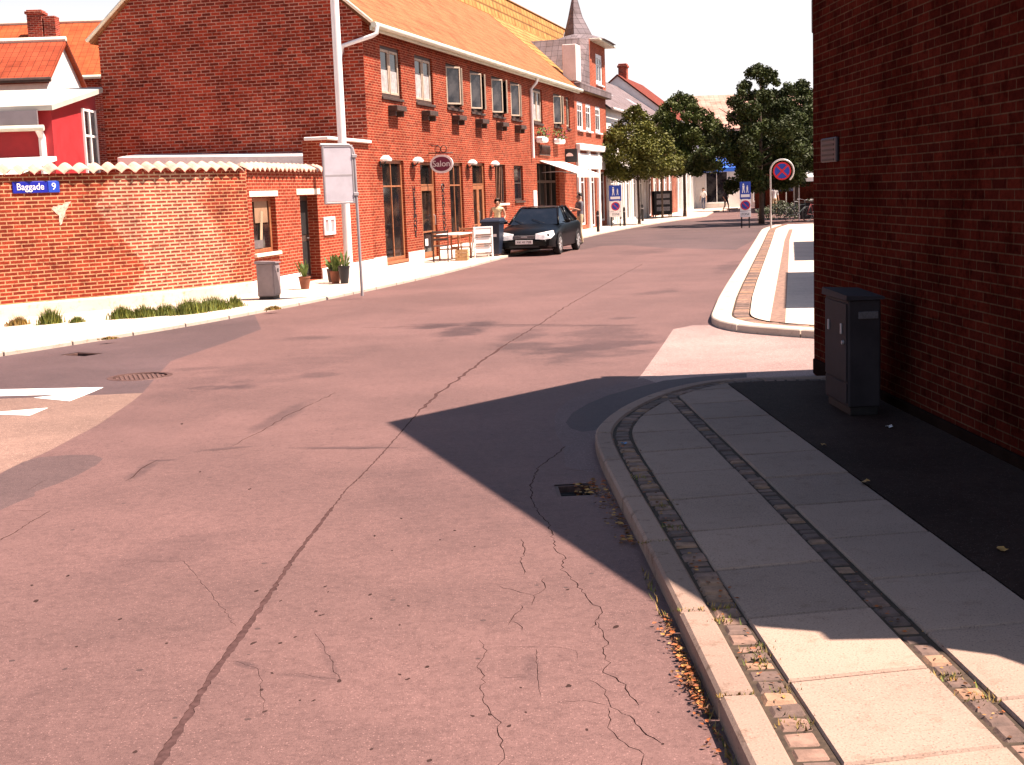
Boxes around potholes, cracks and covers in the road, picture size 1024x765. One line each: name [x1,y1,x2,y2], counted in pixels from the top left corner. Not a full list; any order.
drain grate [555,484,597,497]
crack [505,447,661,765]
crack [477,640,505,765]
